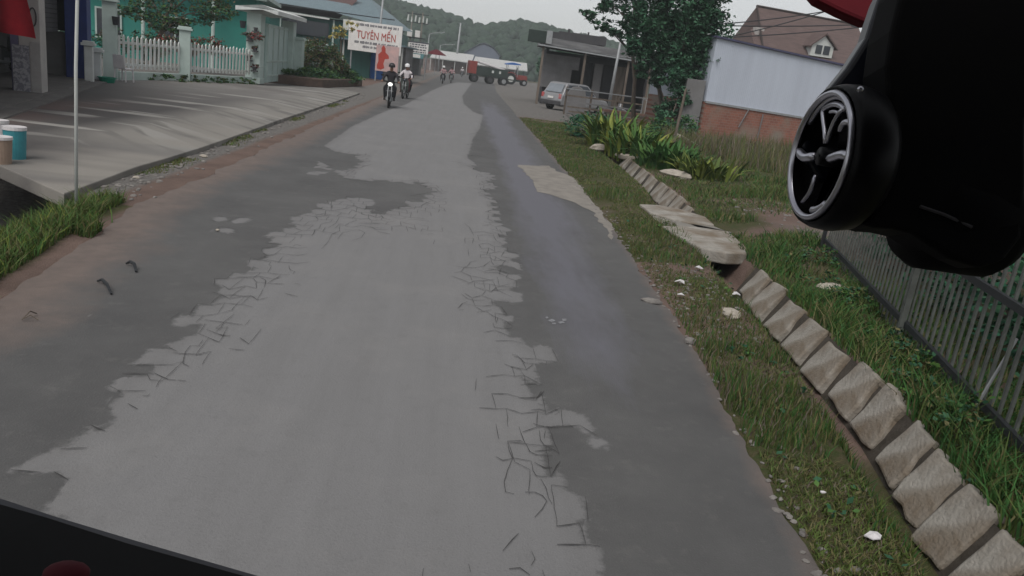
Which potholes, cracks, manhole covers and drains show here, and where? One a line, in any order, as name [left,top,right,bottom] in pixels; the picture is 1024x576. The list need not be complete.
crack [17,226,301,518]
crack [215,192,447,272]
crack [422,196,597,576]
